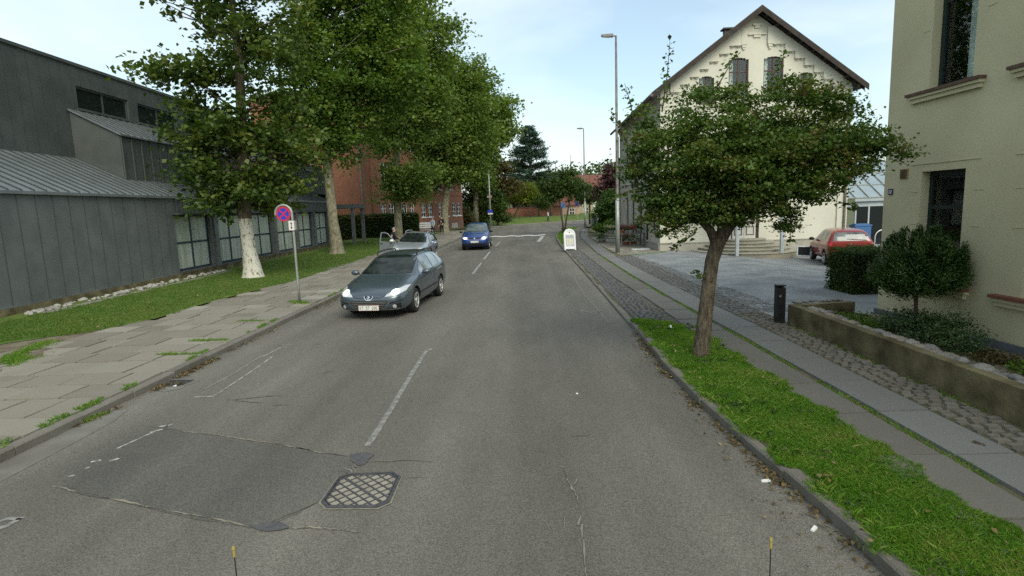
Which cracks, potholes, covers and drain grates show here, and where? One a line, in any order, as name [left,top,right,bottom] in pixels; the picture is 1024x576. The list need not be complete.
crack [561,466,587,576]
